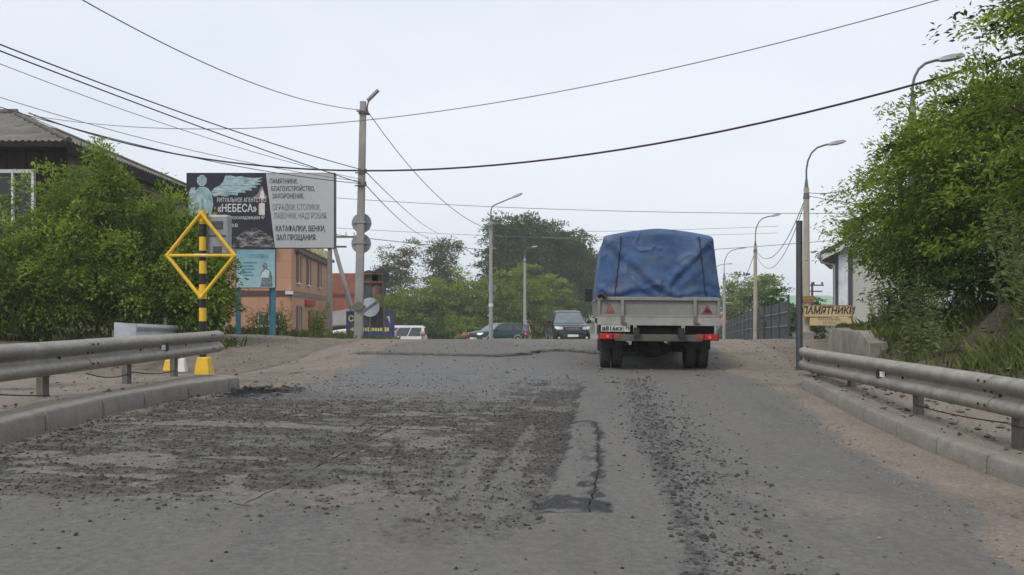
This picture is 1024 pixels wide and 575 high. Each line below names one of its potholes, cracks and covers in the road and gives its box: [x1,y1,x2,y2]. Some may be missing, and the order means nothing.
crack [235,413,426,506]
crack [354,349,675,357]
pothole [221,386,296,399]
crack [535,420,610,518]
